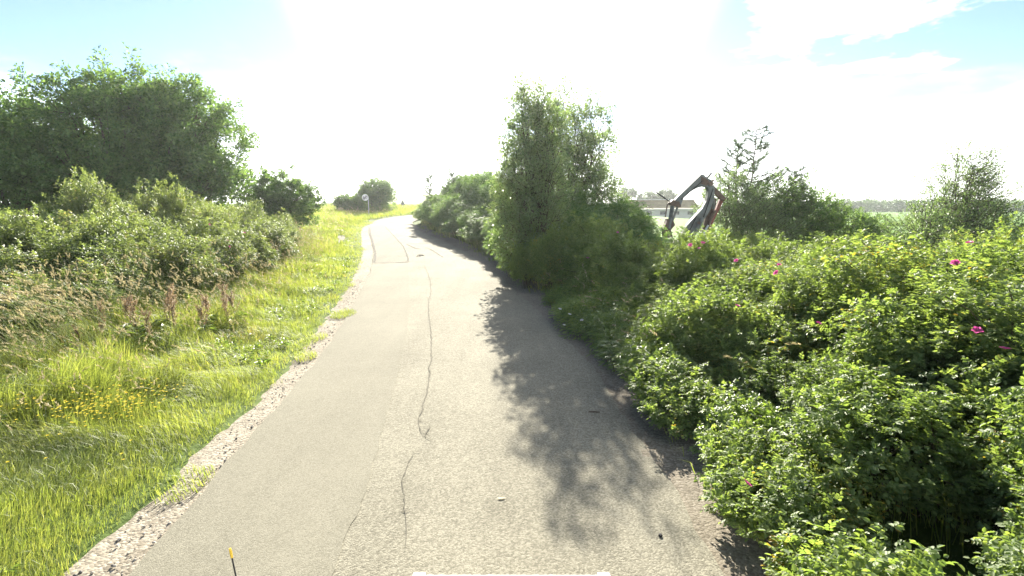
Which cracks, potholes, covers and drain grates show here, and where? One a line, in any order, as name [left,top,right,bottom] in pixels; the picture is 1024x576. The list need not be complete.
crack [399,244,443,550]
